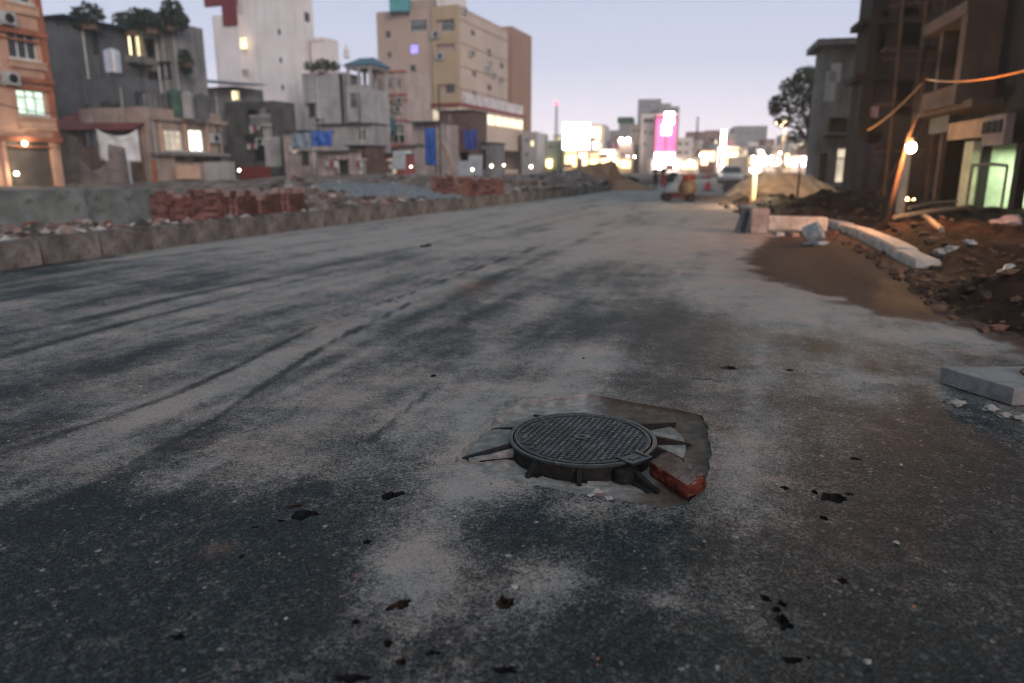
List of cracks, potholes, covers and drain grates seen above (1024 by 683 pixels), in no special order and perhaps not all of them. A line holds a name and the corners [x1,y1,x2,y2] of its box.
manhole cover [462,413,691,495]
pothole [820,492,848,504]
pothole [773,614,794,632]
